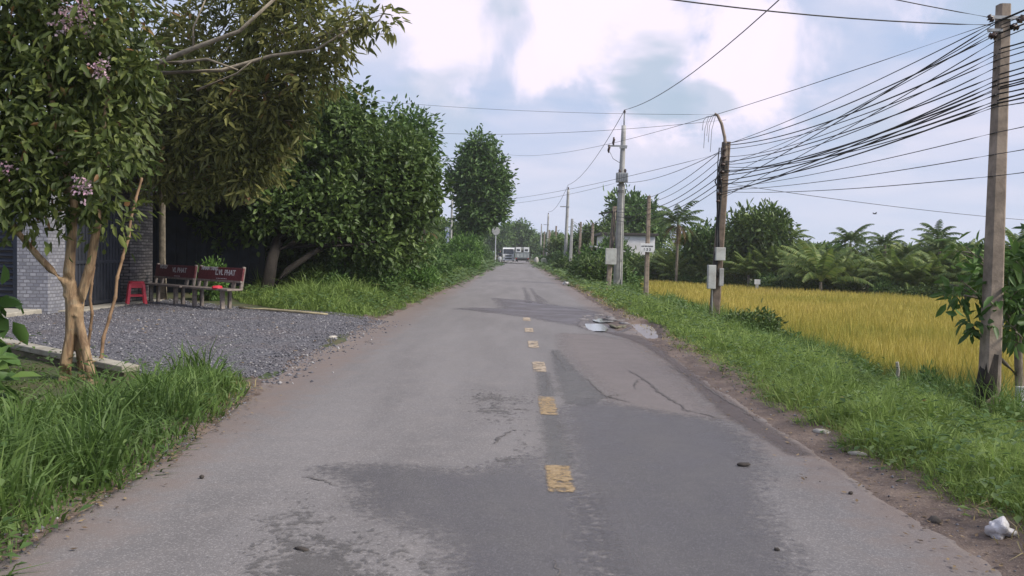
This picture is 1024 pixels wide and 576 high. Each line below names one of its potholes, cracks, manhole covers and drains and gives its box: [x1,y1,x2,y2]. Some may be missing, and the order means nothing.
pothole [577,316,631,332]
crack [586,363,766,428]
